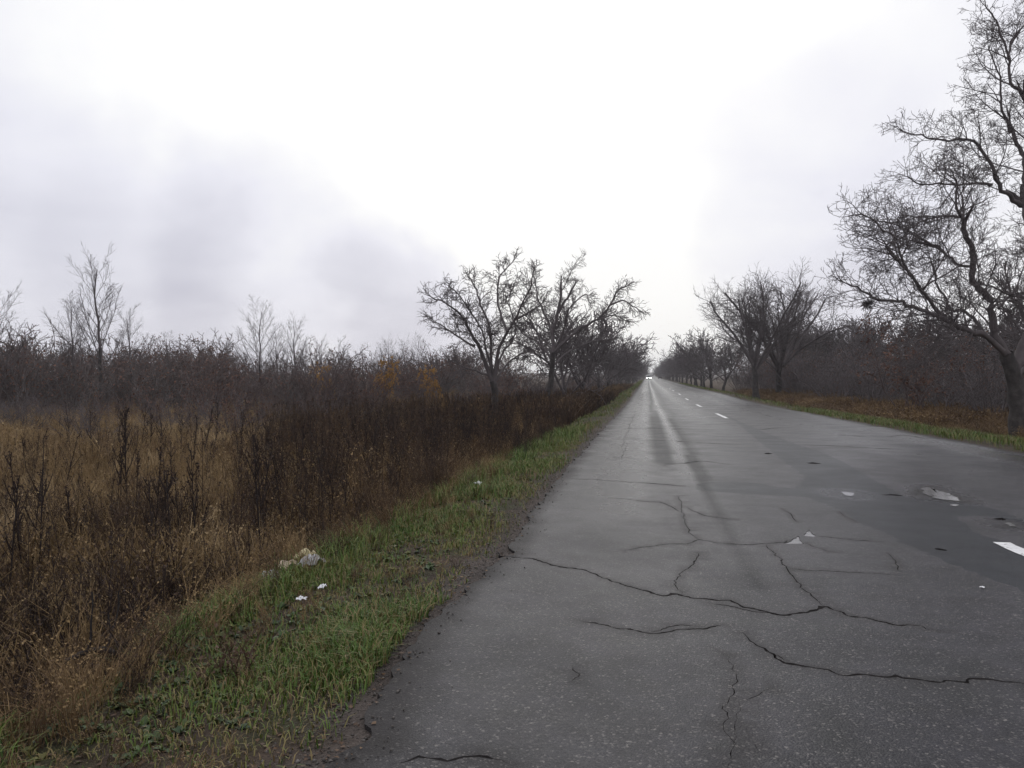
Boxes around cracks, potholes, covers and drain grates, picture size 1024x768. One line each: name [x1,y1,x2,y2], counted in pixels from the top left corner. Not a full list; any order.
crack [395,755,503,764]
crack [498,497,1024,765]
